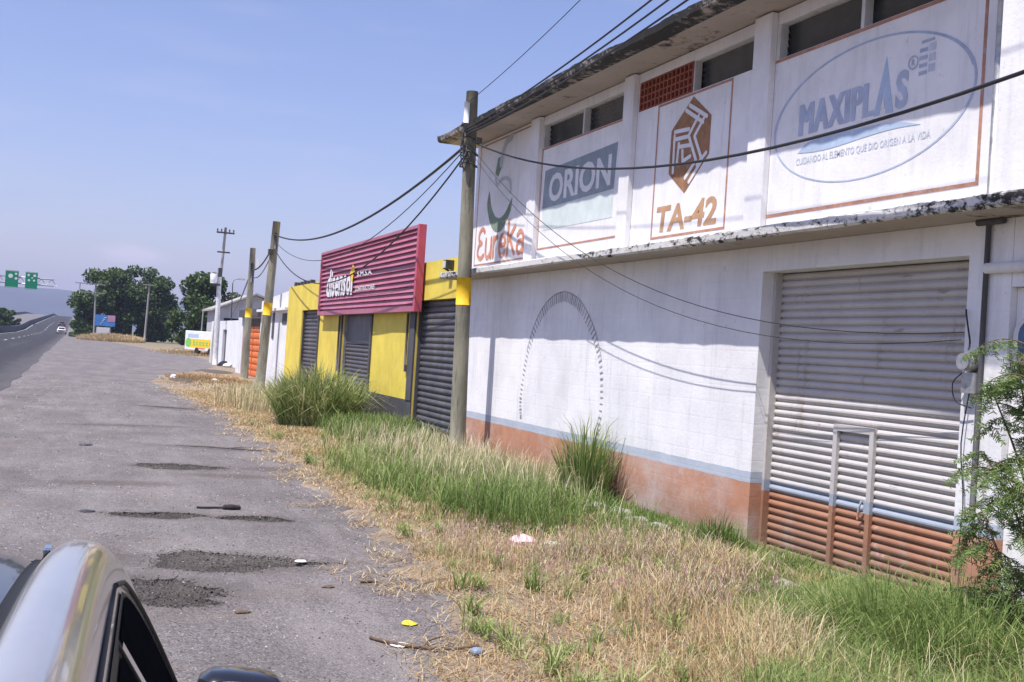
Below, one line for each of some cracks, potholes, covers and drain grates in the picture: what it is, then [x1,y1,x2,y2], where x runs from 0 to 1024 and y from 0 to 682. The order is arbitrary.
pothole [122,462,230,470]
pothole [131,575,241,611]
pothole [100,511,226,520]
pothole [137,547,356,575]
